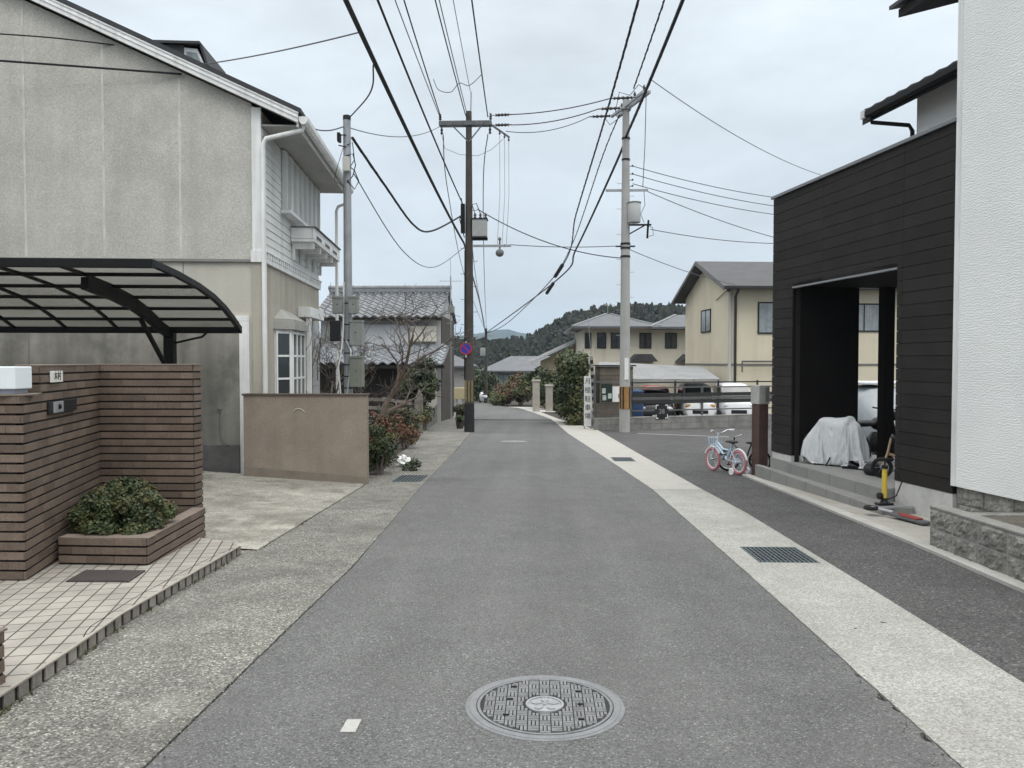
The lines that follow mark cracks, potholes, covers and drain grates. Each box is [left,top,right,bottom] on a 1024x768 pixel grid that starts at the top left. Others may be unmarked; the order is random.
drain grate [740,547,820,563]
manhole cover [465,675,625,742]
